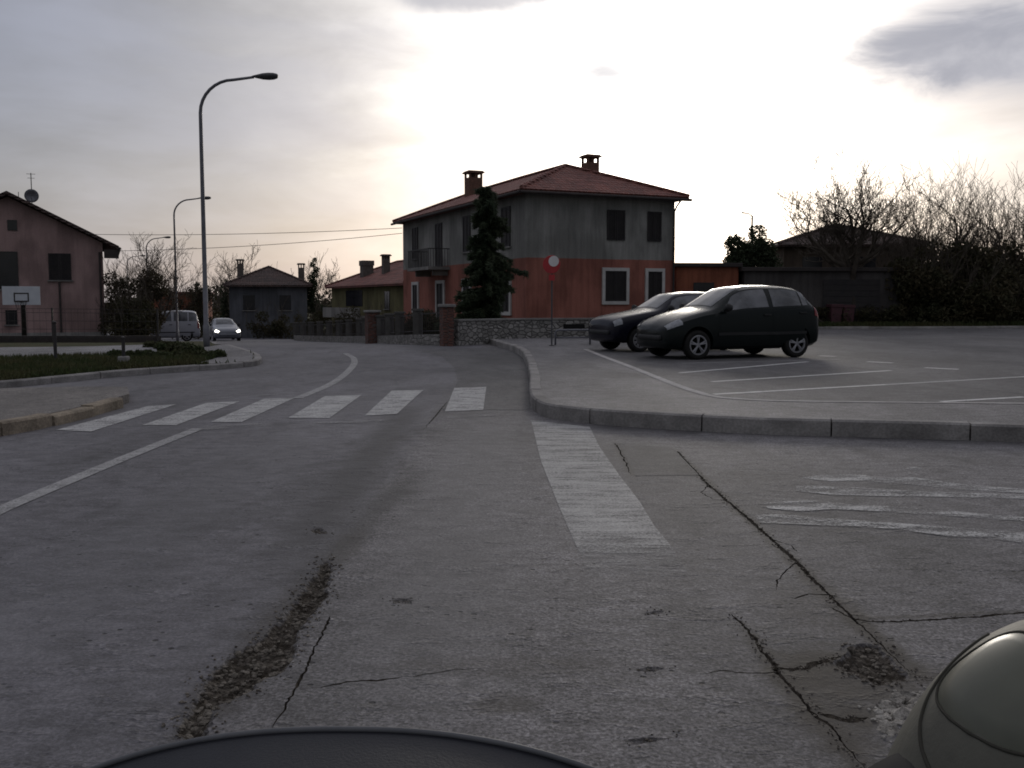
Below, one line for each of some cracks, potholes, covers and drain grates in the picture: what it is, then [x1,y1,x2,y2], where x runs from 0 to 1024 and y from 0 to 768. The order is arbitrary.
crack [677,451,1024,768]
pothole [821,637,927,691]
pothole [382,596,414,606]
pothole [161,554,344,740]
crack [273,617,467,726]
